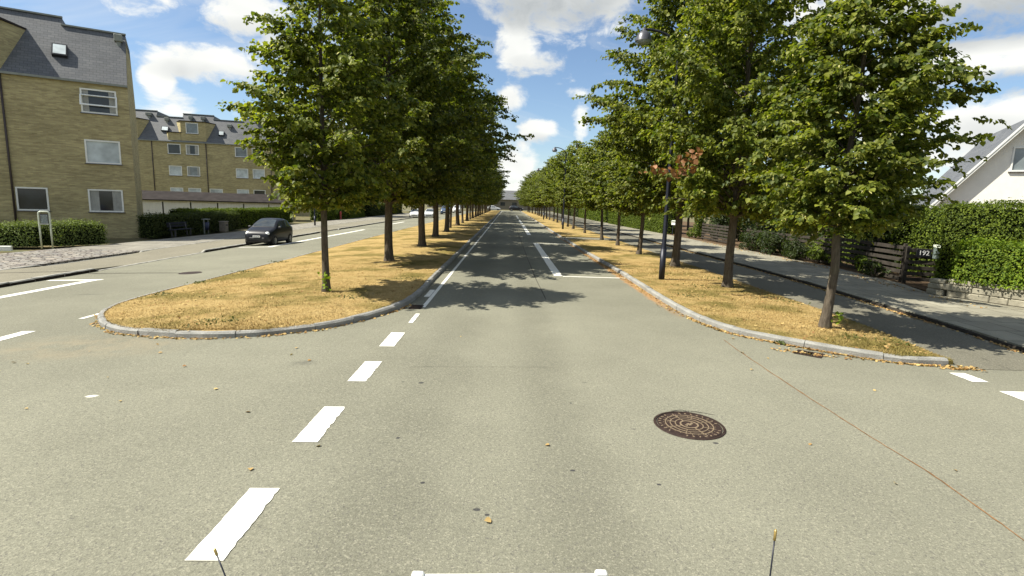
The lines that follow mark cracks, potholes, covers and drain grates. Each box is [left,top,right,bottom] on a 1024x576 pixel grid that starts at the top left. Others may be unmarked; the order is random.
manhole cover [653,411,726,440]
